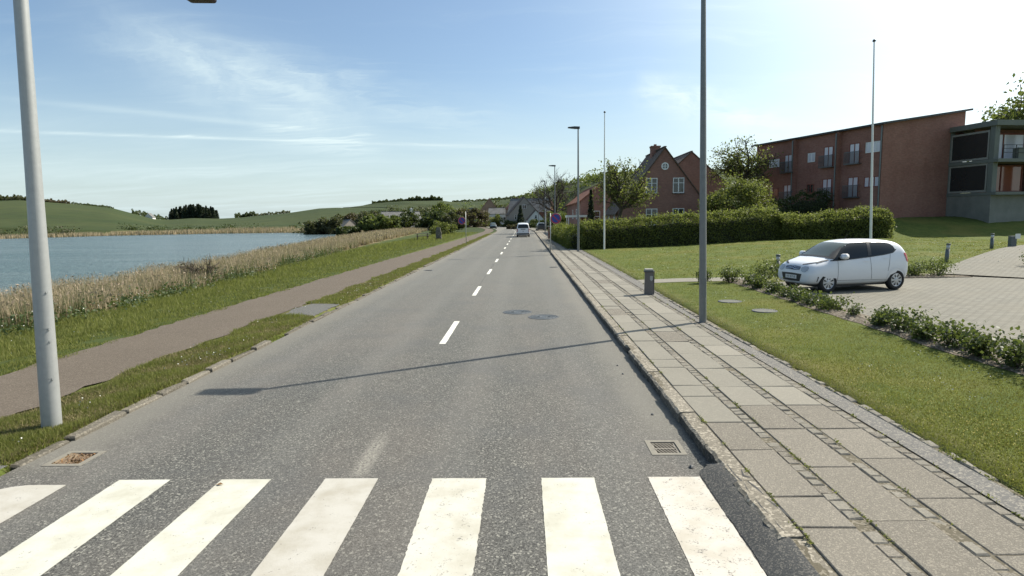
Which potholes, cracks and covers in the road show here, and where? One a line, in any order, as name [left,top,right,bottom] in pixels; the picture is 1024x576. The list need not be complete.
drain grate [644,440,688,455]
drain grate [41,451,106,466]
